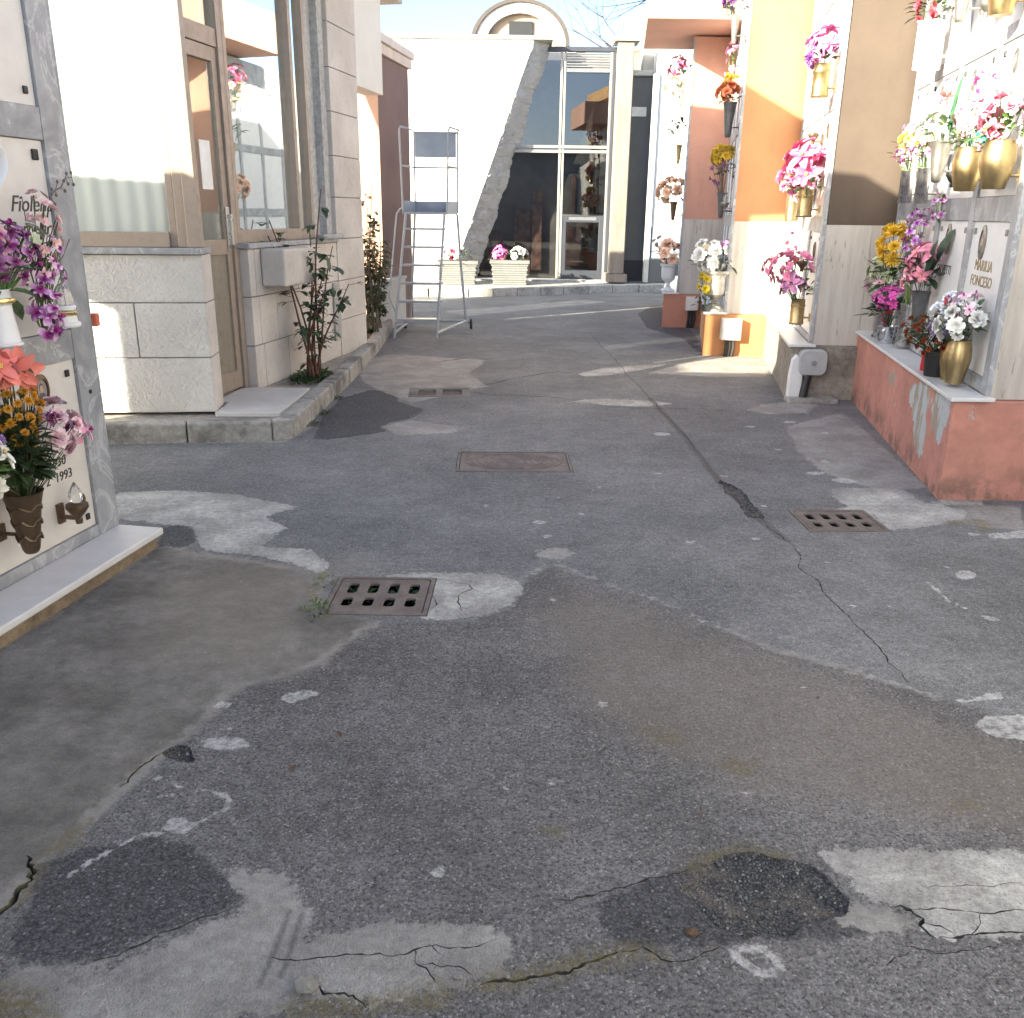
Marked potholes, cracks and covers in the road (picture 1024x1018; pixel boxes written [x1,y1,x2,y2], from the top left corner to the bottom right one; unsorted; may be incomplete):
crack [886,882,1024,967]
manhole cover [456,451,574,472]
crack [120,752,166,787]
drain grate [320,576,437,617]
crack [265,939,723,1008]
crack [760,517,925,696]
pothole [678,852,849,938]
drain grate [788,510,891,532]
